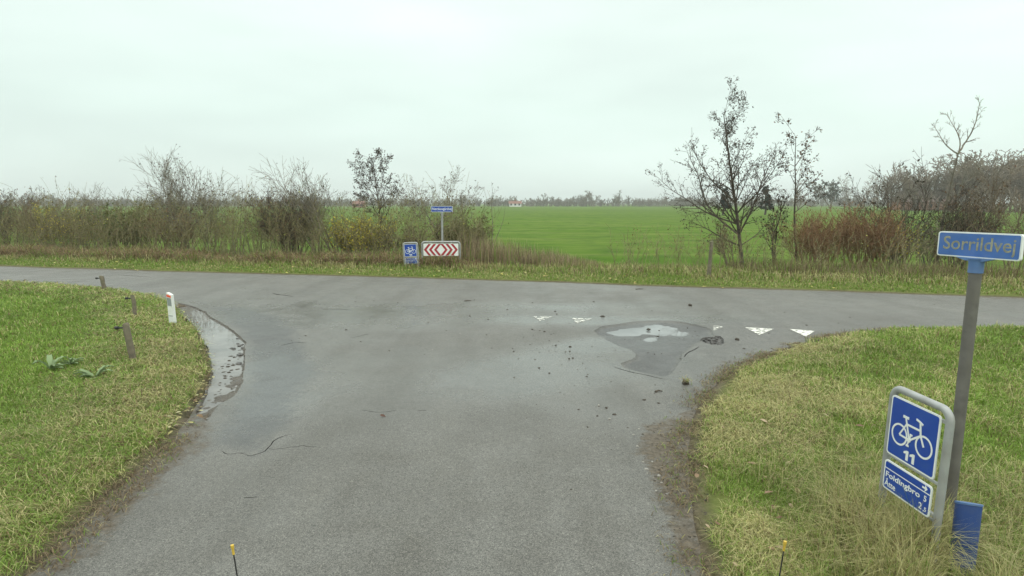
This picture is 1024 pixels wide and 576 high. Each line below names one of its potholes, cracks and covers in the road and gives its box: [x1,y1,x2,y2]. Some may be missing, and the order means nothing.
pothole [594,320,713,377]
pothole [701,336,724,345]
crack [222,434,311,456]
